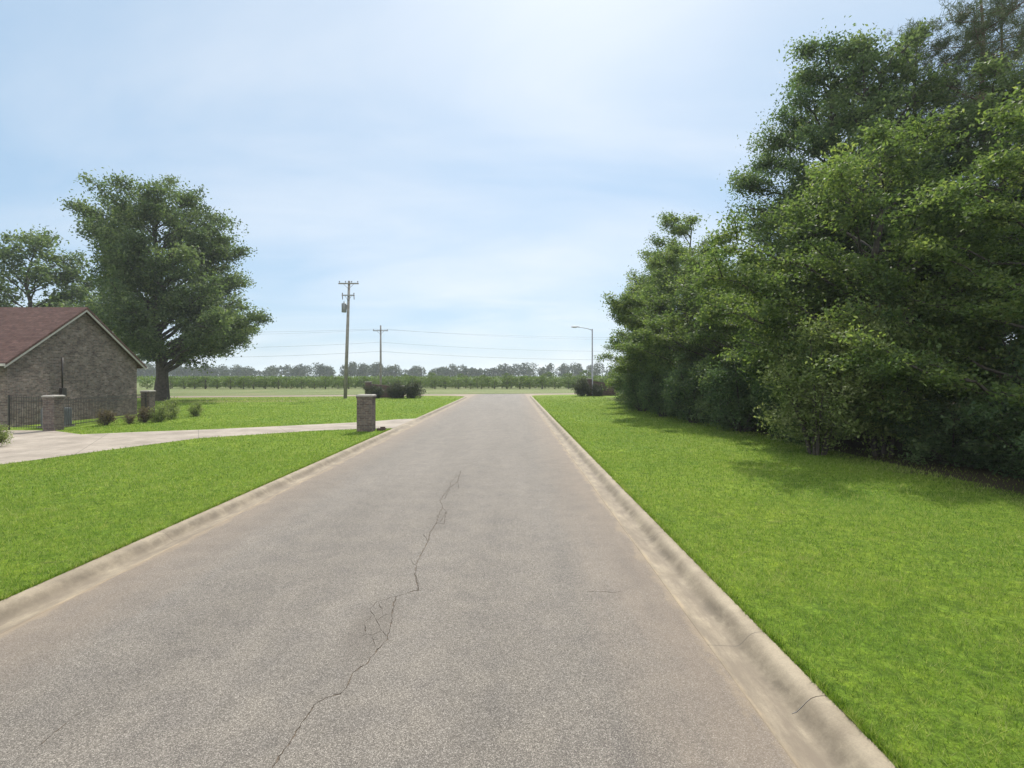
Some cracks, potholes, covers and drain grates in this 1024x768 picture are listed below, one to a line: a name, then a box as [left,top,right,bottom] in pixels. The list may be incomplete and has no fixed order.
crack [272,474,460,768]
